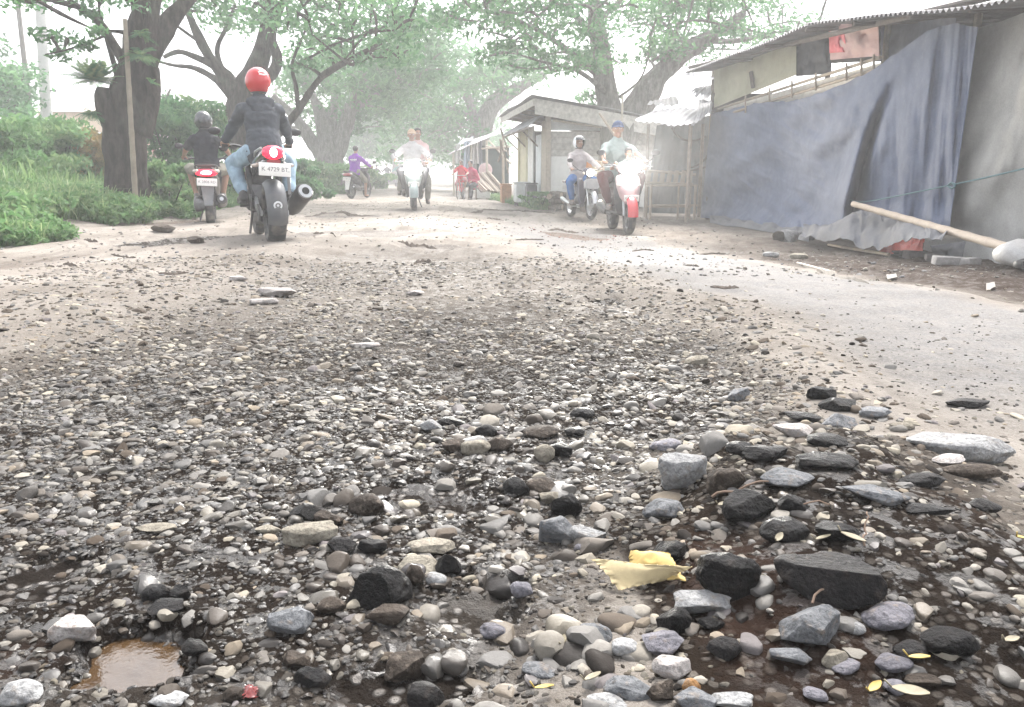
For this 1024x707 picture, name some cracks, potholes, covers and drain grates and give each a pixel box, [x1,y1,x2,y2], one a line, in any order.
crack [398,240,437,264]
pothole [0,244,812,707]
crack [304,211,370,237]
